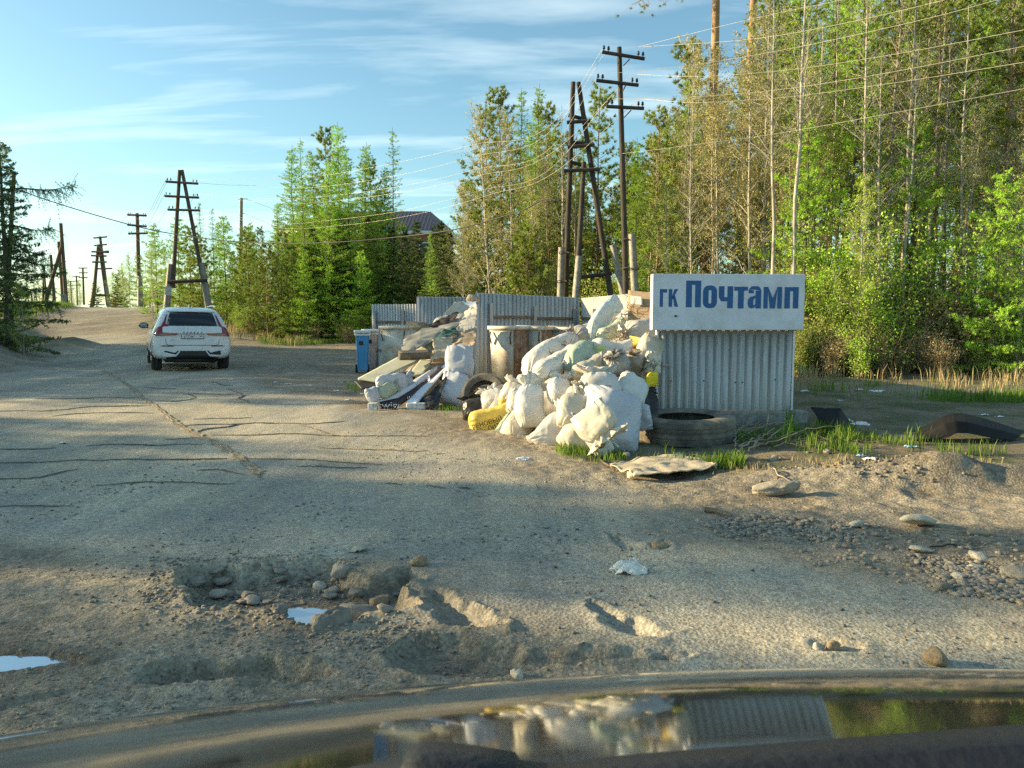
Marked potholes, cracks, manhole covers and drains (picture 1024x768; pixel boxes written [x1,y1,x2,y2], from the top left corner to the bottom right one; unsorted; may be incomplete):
pothole [587,599,674,638]
pothole [0,648,89,683]
crack [0,370,459,486]
pothole [420,588,508,627]
pothole [174,556,428,621]
pothole [132,652,340,686]
